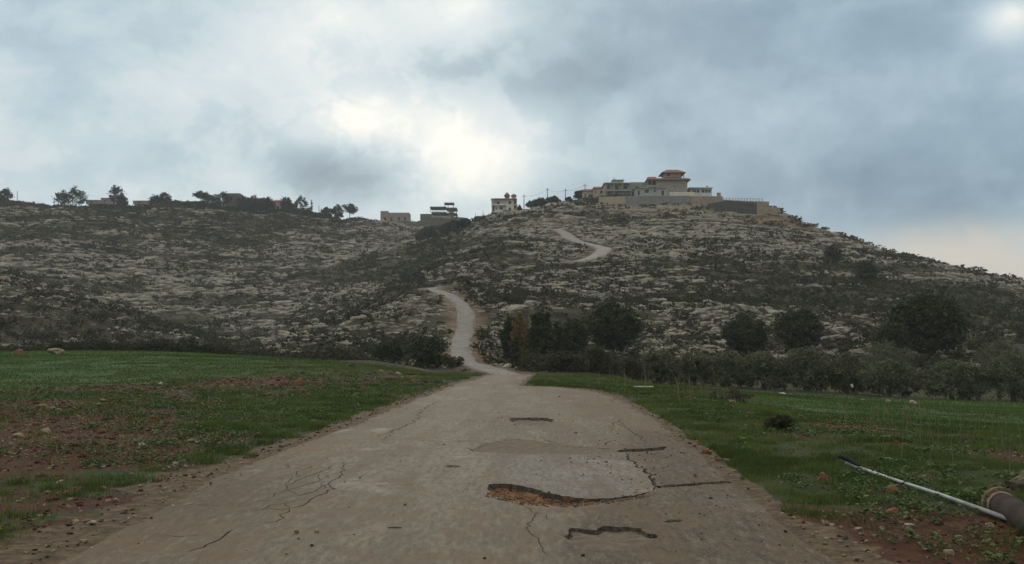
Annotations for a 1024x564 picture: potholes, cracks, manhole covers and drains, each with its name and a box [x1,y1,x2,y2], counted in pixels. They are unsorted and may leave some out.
pothole [487,484,651,506]
crack [261,463,346,522]
crack [526,507,548,554]
crack [604,420,656,490]
